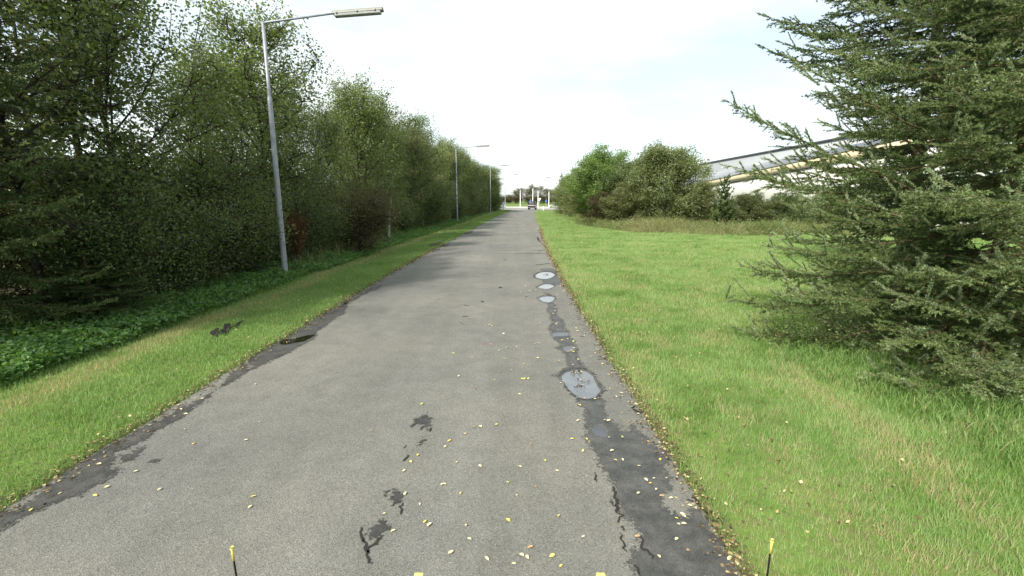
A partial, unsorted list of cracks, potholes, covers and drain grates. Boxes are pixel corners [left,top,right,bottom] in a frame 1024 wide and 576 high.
pothole [533,271,556,280]
pothole [558,367,606,402]
crack [359,527,381,564]
crack [594,472,654,576]
pothole [591,424,607,437]
